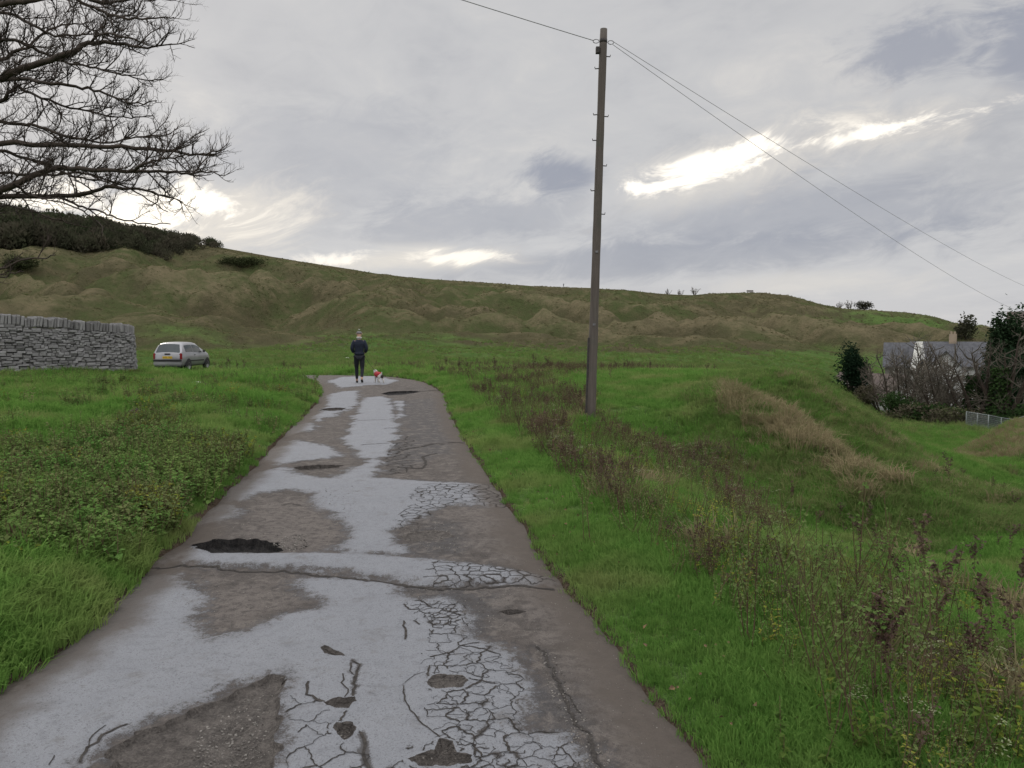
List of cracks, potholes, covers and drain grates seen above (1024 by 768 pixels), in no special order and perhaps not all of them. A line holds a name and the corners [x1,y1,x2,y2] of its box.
pothole [326,719,363,744]
crack [363,437,506,528]
pothole [188,538,286,554]
pothole [495,609,530,617]
pothole [290,464,348,472]
crack [154,561,604,768]
pothole [422,672,473,692]
pothole [316,644,349,658]
pothole [400,737,478,768]
